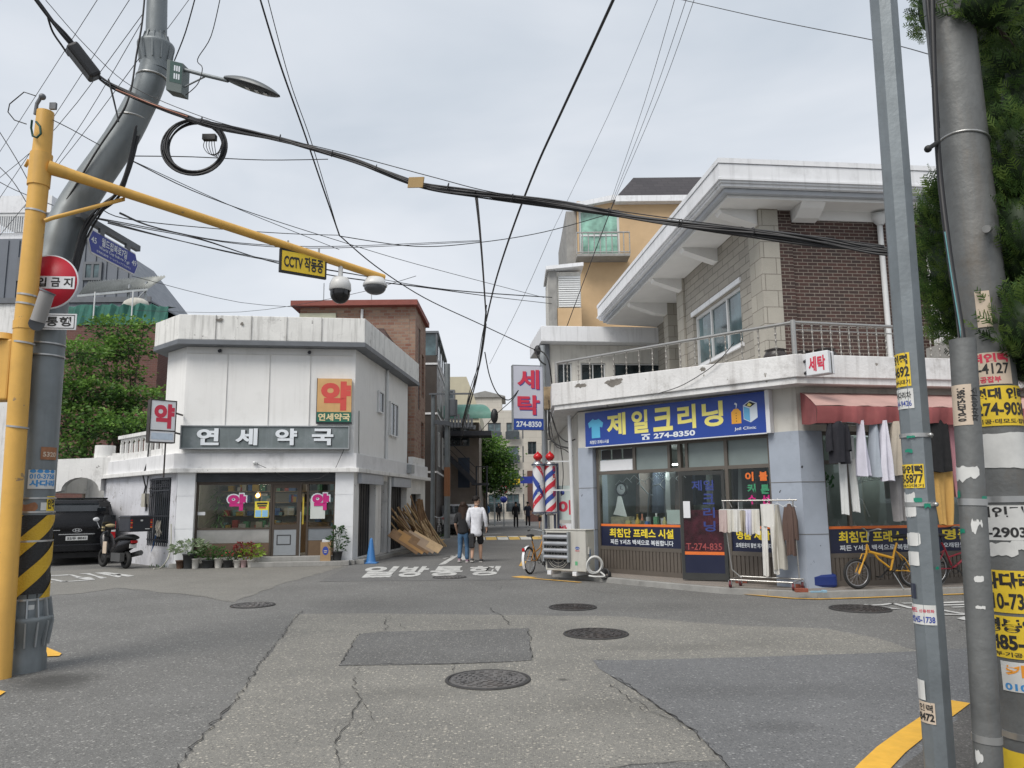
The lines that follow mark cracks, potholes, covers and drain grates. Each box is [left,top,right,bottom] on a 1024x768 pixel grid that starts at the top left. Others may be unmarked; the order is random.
manhole cover [563,628,629,640]
manhole cover [828,604,893,613]
crack [334,618,497,768]
manhole cover [445,669,531,690]
